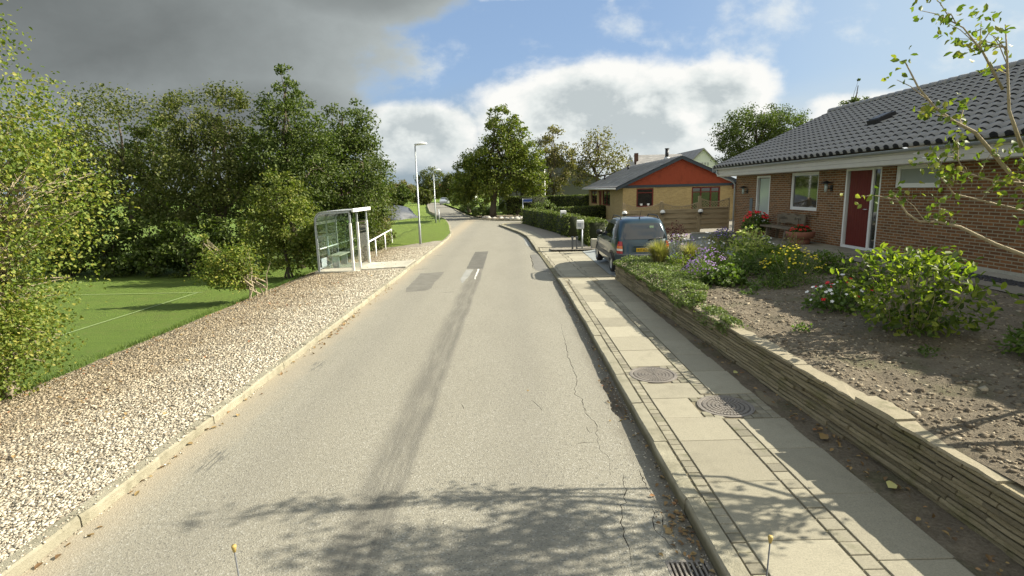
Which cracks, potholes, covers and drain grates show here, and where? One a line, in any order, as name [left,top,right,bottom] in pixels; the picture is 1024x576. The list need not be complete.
drain grate [665,559,715,576]
manhole cover [630,367,678,384]
crack [561,325,674,562]
manhole cover [697,395,755,418]
